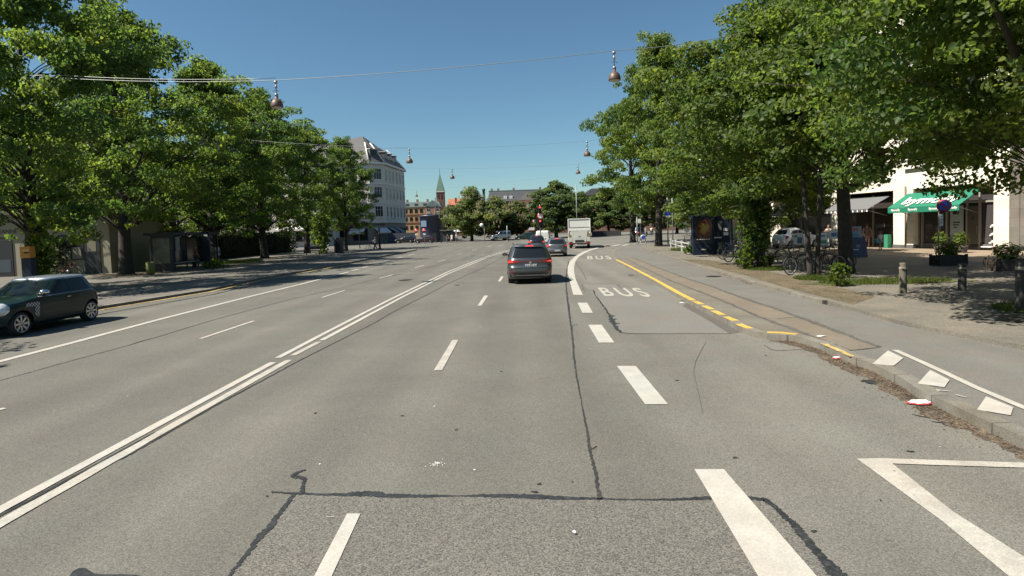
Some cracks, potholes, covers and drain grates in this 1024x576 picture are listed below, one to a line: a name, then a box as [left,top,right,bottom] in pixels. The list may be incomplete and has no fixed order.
crack [621,332,729,413]
crack [565,261,621,499]
